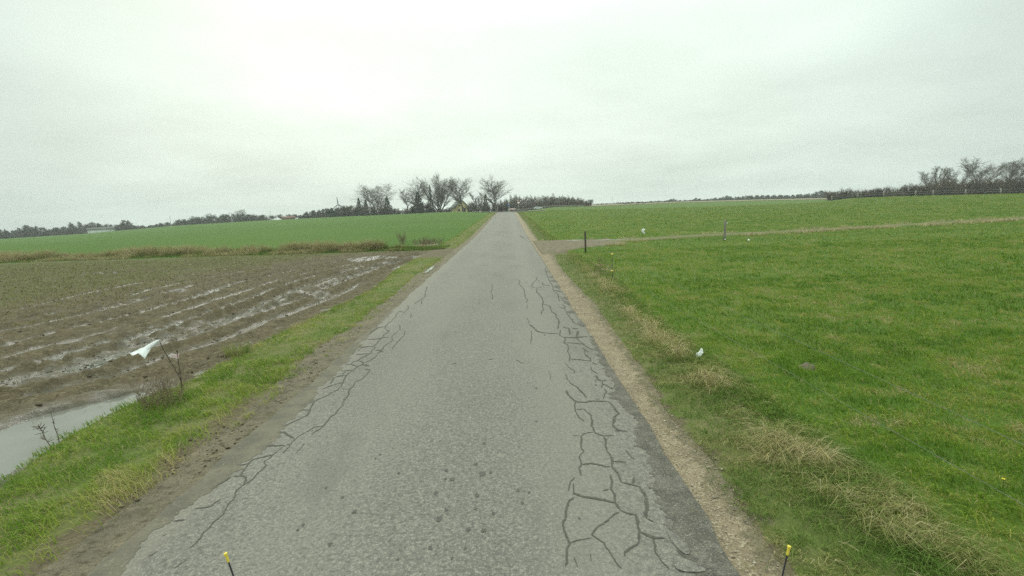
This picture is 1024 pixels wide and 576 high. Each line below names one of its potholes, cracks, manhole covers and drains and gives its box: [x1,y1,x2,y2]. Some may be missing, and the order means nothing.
crack [165,287,427,567]
crack [518,269,699,568]
